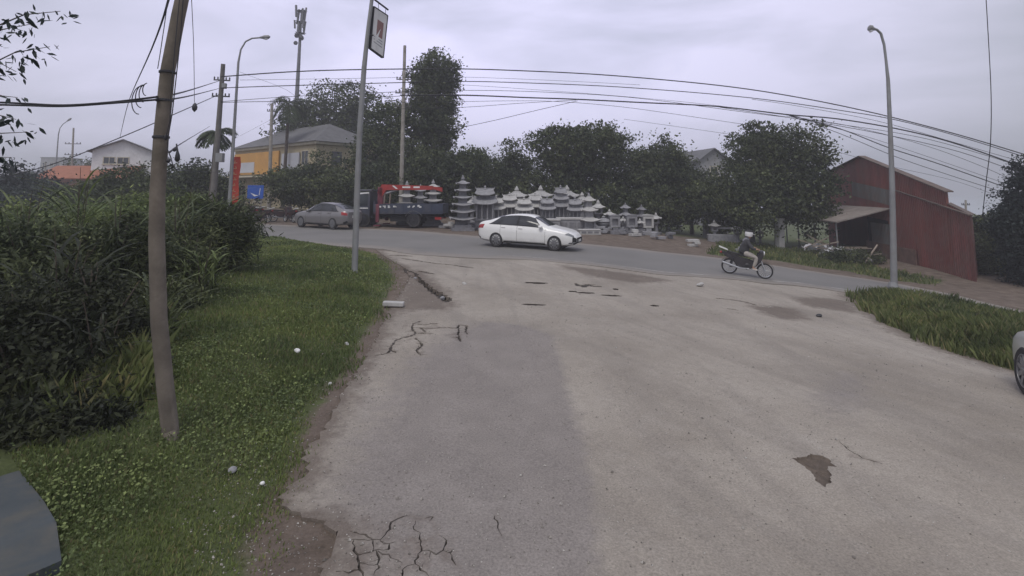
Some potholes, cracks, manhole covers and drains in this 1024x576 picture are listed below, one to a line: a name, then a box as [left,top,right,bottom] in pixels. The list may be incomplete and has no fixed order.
crack [389,324,467,353]
crack [353,523,392,576]
pothole [792,454,836,487]
